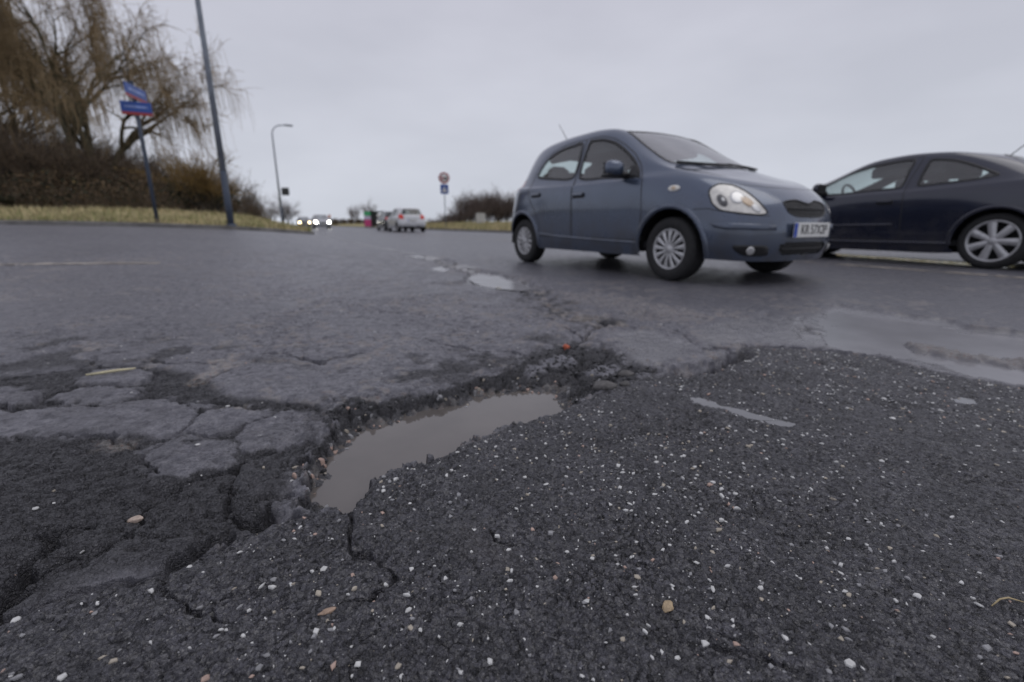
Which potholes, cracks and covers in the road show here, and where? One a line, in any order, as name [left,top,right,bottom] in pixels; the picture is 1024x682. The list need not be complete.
crack [534,316,642,344]
pothole [442,268,533,293]
pothole [285,341,659,521]
pothole [794,304,1024,384]
crack [260,351,364,366]
crack [0,351,318,626]
